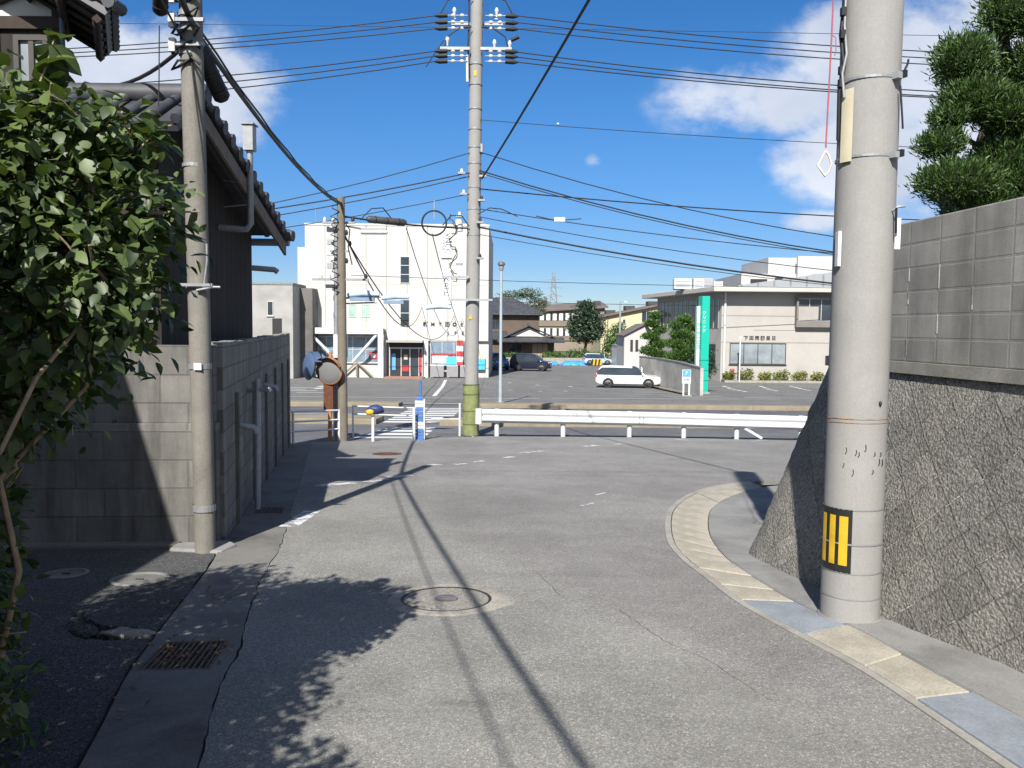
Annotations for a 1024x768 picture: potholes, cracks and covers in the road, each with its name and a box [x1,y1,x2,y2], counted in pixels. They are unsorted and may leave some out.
drain grate [135,640,228,671]
crack [536,571,773,702]
manhole cover [44,568,90,579]
pothole [57,612,158,641]
manhole cover [387,585,516,616]
manhole cover [109,572,170,586]
crack [197,448,310,768]
